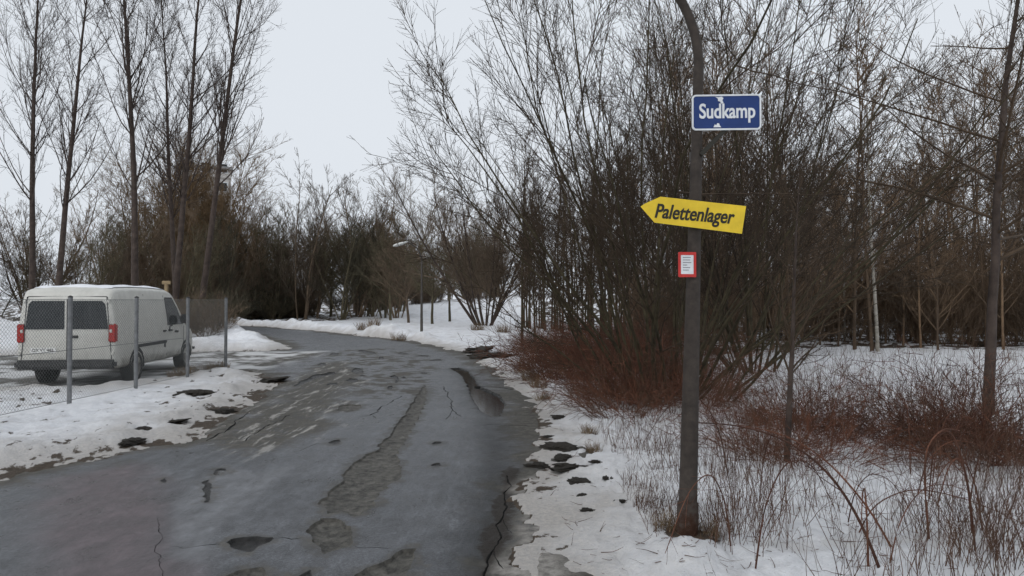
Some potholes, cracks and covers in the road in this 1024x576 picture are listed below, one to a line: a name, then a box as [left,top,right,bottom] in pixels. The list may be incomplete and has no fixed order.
crack [482,476,512,576]
pothole [201,480,213,503]
pothole [450,368,506,417]
pothole [226,536,273,552]
crack [154,518,215,576]
crack [444,387,529,426]
crack [206,413,289,442]
